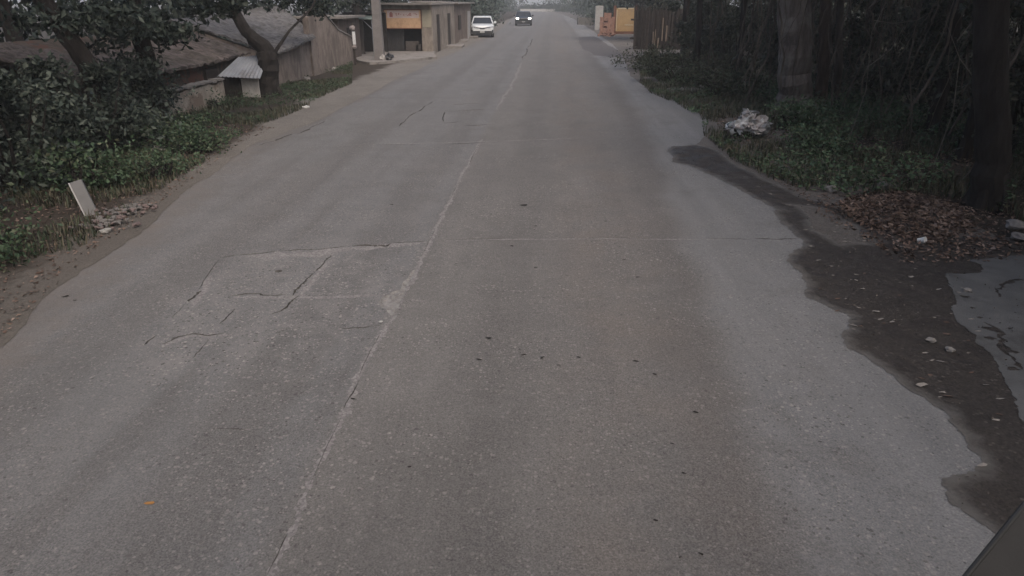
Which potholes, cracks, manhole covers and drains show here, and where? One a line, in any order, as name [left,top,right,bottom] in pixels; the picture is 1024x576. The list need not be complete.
crack [144,241,423,357]
crack [397,102,538,145]
